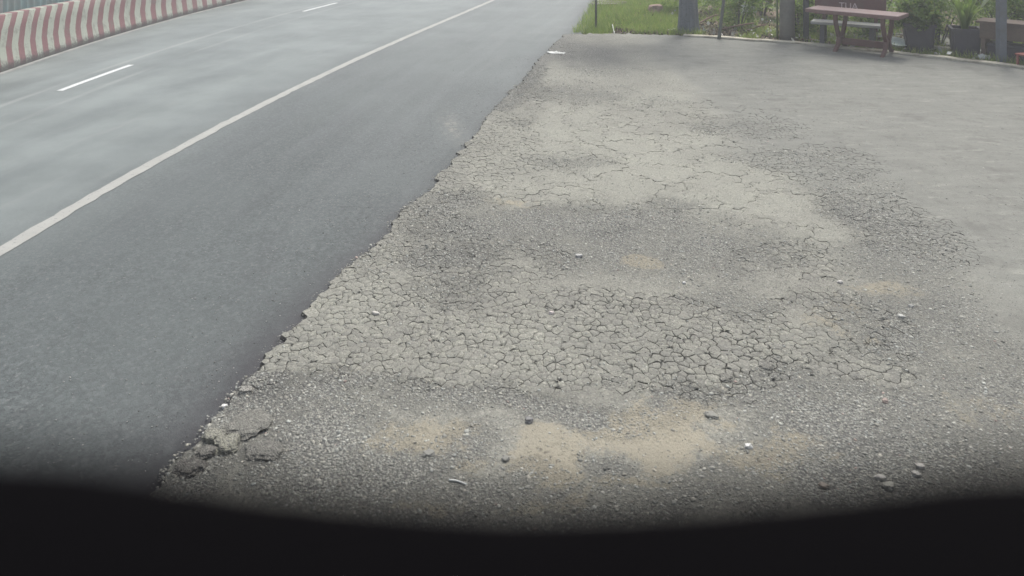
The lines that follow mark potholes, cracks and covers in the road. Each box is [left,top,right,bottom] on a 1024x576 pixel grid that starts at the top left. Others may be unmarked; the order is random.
crack [462,94,982,269]
crack [286,115,916,409]
